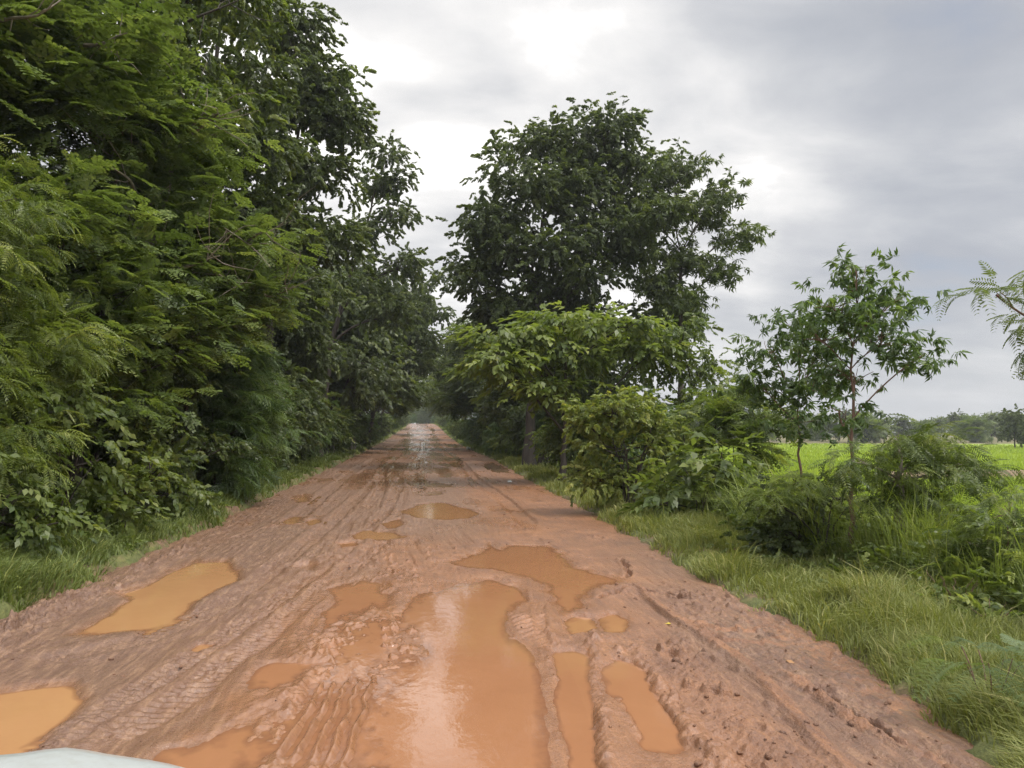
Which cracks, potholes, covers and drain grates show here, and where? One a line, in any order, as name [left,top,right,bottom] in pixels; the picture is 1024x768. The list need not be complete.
pothole [56,555,249,641]
pothole [136,698,290,768]
pothole [430,540,638,623]
pothole [276,576,430,768]
pothole [0,676,104,755]
pothole [582,608,638,635]
pothole [397,501,487,520]
pothole [550,636,620,768]
pothole [604,647,706,768]
pothole [234,651,333,699]
pothole [341,528,412,541]
pothole [332,572,599,768]
